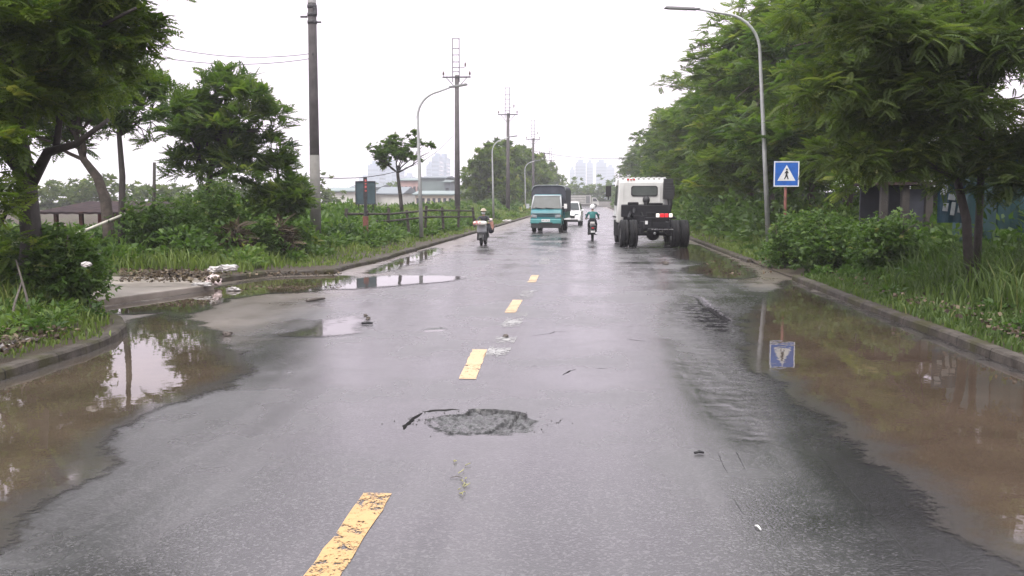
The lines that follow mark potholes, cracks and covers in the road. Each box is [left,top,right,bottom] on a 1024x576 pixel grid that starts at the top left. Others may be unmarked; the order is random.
pothole [381,409,563,436]
